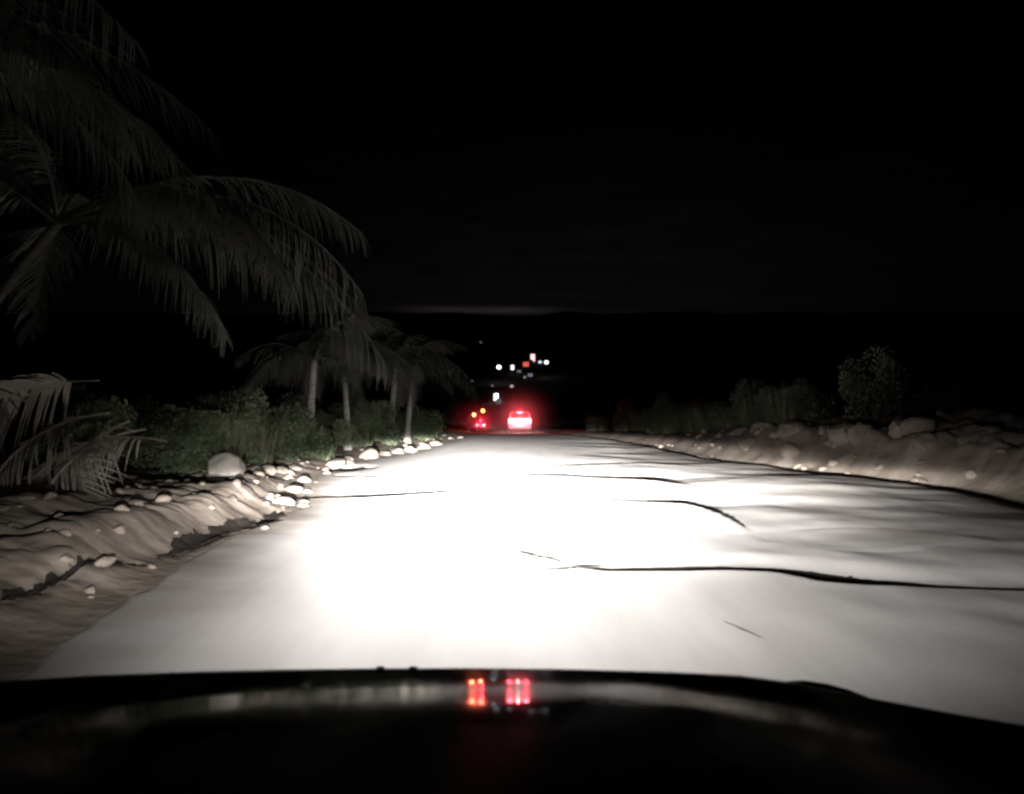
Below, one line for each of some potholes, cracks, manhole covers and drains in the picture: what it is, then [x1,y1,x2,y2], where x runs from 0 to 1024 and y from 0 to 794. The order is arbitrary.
crack [520,551,1024,590]
crack [503,473,681,484]
crack [647,501,745,528]
crack [722,621,763,639]
